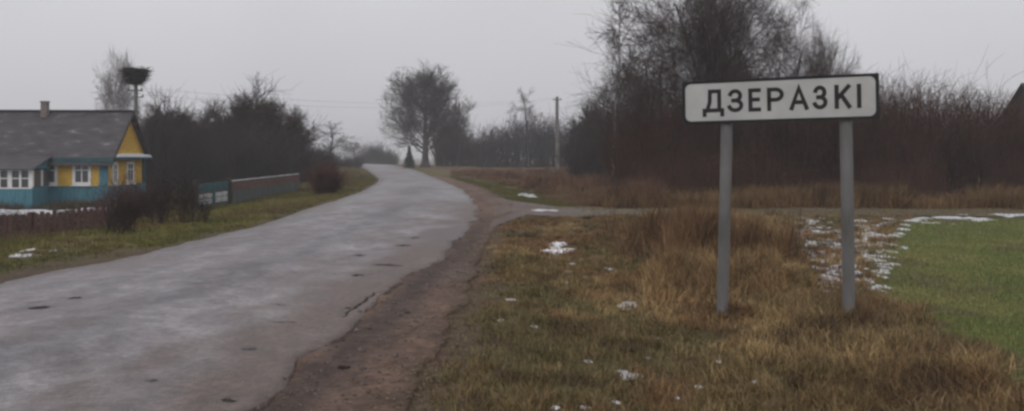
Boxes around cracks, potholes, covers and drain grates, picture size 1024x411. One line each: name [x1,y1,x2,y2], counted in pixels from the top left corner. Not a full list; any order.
crack [342,293,376,318]
